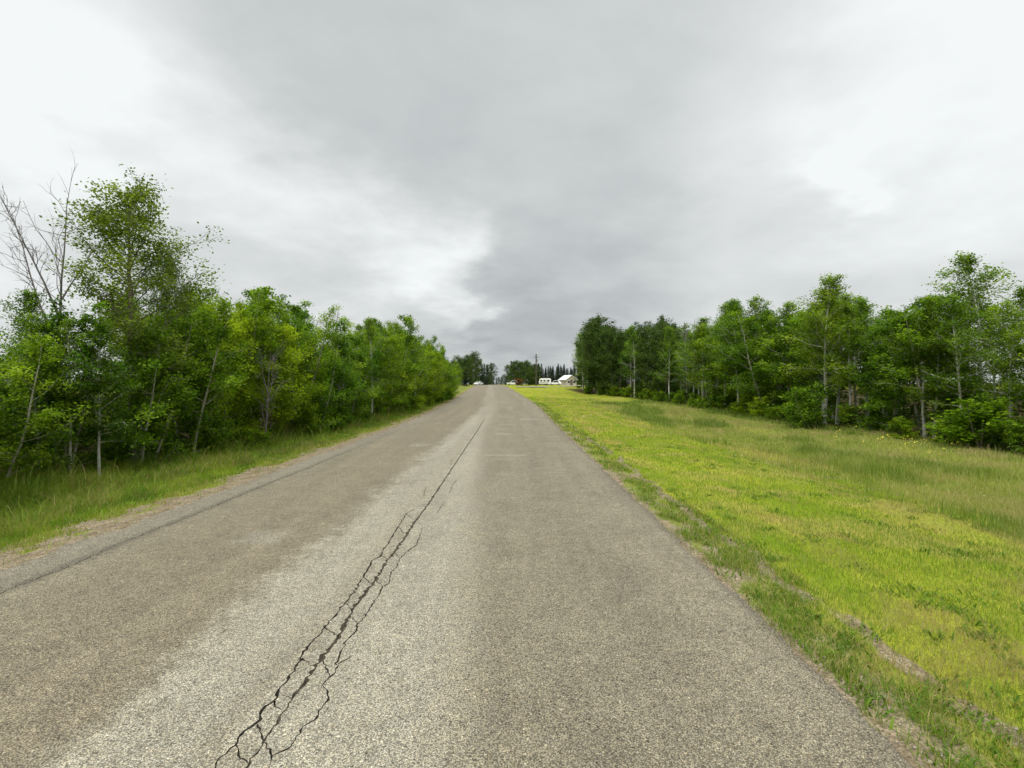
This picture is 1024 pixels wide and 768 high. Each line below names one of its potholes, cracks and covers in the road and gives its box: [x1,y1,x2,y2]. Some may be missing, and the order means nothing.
crack [215,418,485,768]
